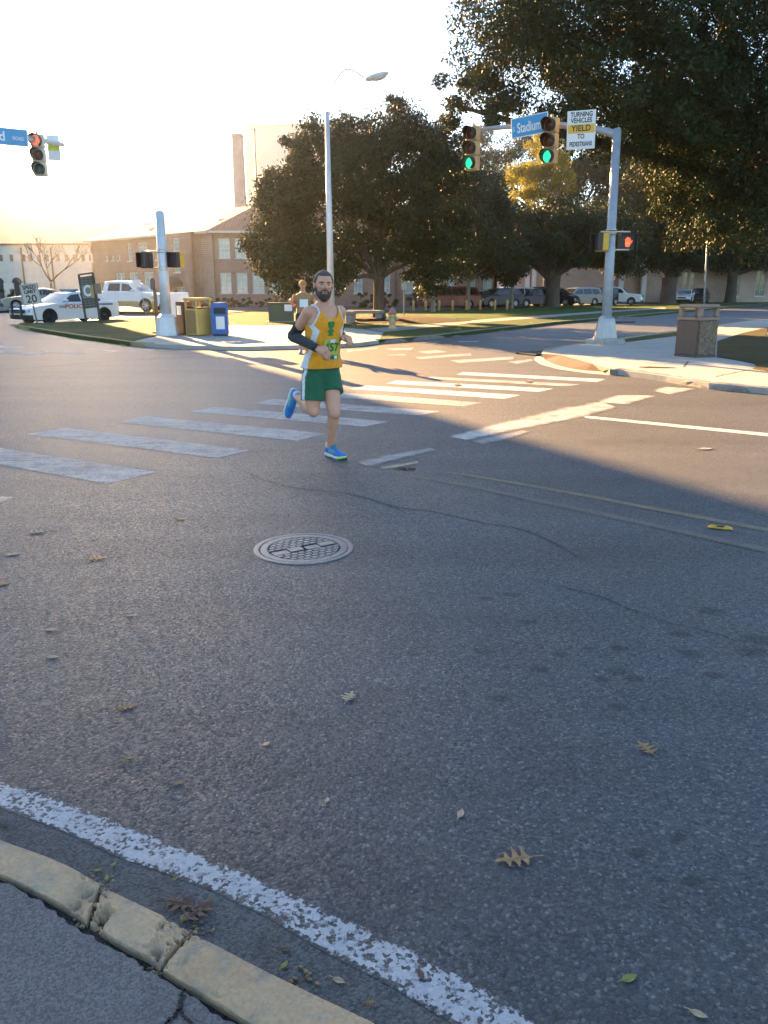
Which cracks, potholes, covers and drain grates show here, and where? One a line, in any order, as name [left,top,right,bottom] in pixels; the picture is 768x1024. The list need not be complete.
crack [227,462,587,558]
manhole cover [254,533,354,565]
crack [163,988,193,1024]
